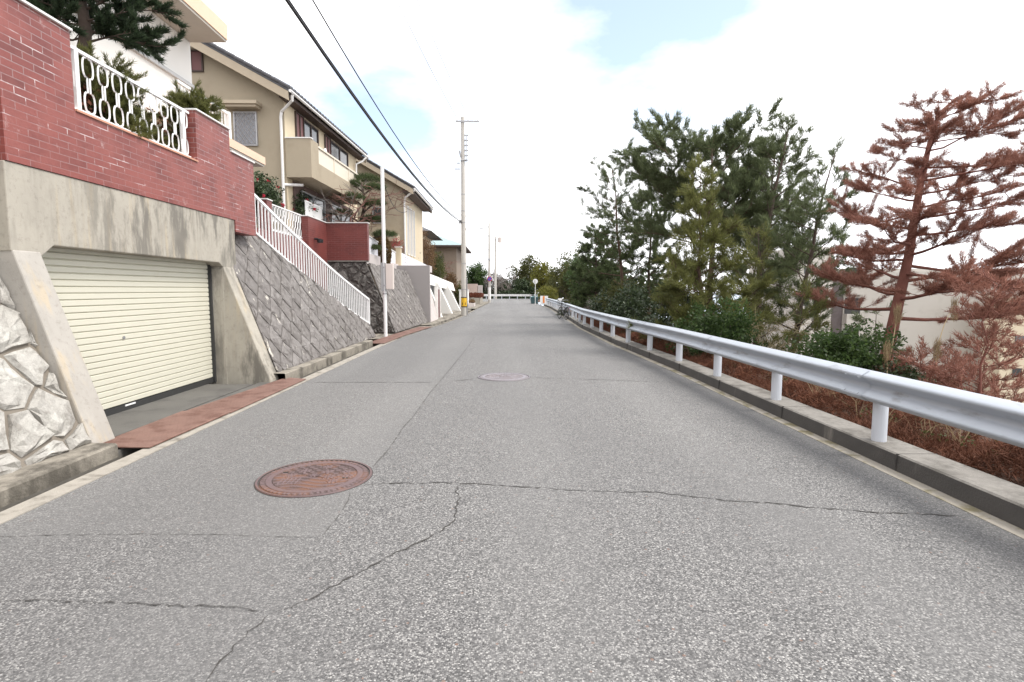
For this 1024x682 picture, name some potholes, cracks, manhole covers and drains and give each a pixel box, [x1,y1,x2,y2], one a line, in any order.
manhole cover [254,459,373,498]
crack [4,482,959,682]
manhole cover [478,373,531,381]
